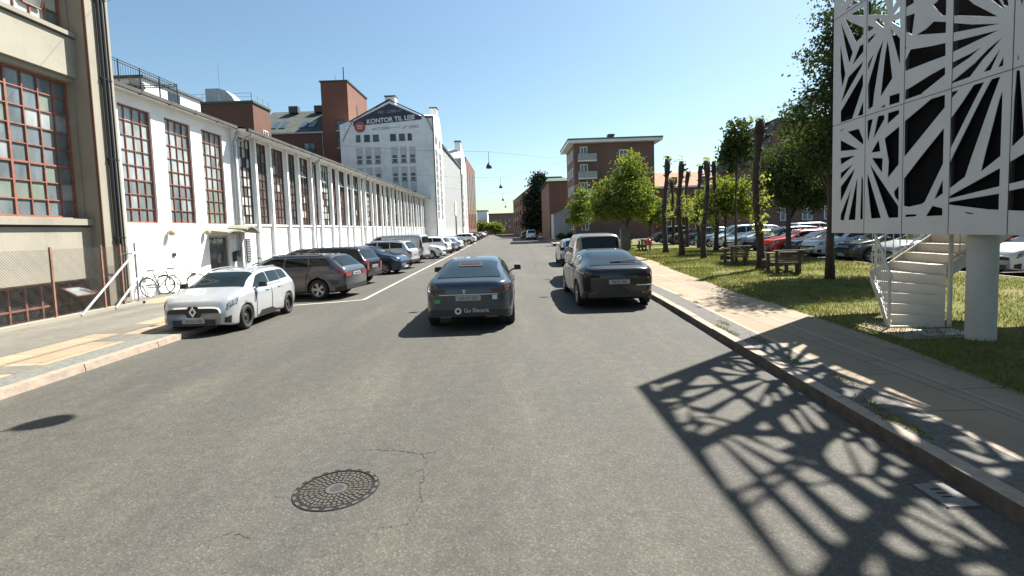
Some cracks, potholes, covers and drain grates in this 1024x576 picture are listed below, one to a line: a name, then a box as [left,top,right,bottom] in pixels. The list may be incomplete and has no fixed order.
drain grate [907,482,984,510]
crack [369,449,436,528]
manhole cover [291,469,379,512]
